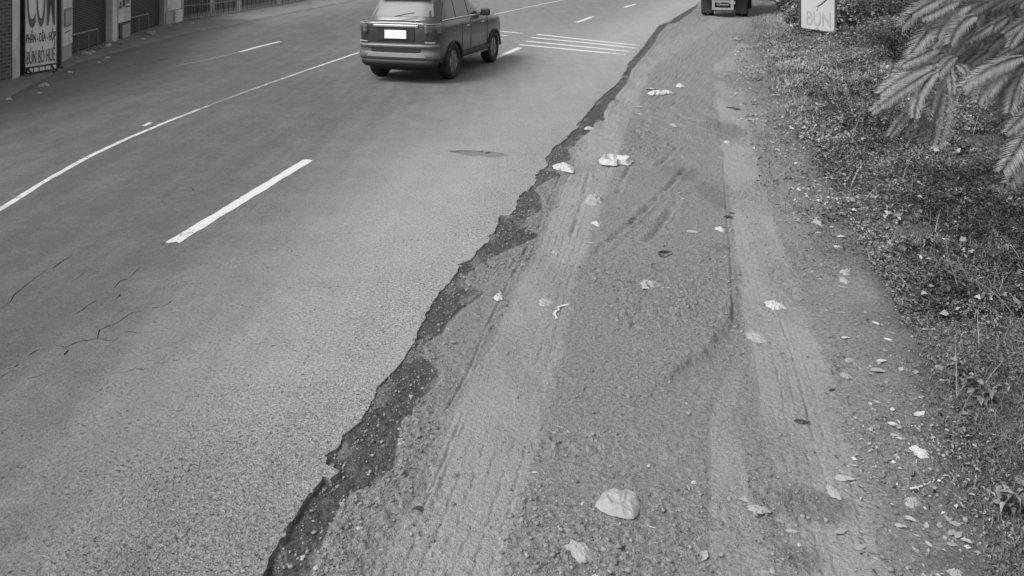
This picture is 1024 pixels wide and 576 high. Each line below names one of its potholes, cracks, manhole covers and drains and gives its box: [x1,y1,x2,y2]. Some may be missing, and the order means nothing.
pothole [449,150,509,158]
crack [61,268,139,355]
